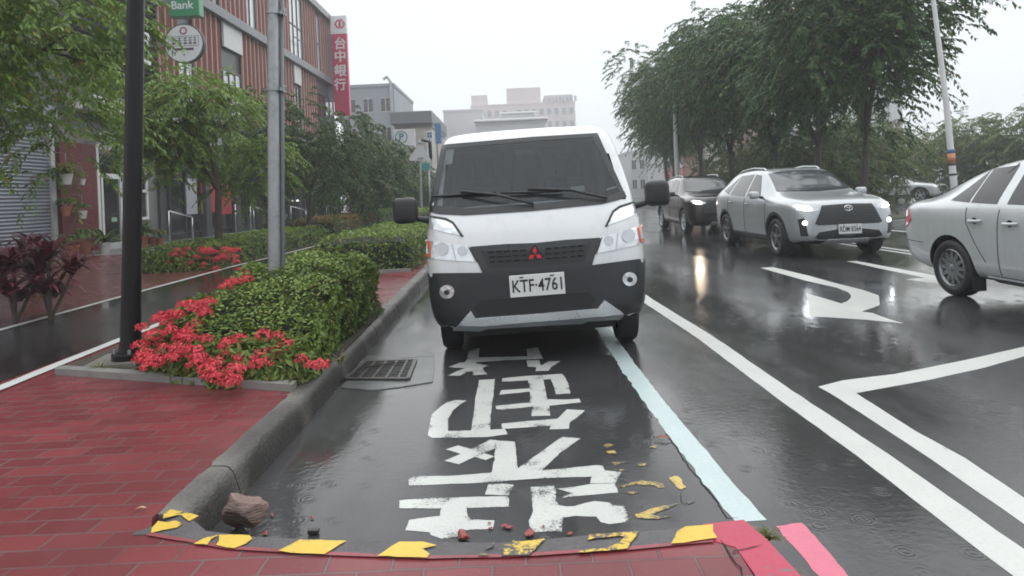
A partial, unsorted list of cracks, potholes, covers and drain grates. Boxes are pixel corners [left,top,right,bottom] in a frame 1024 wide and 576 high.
drain grate [344,358,417,380]
crack [665,433,727,518]
